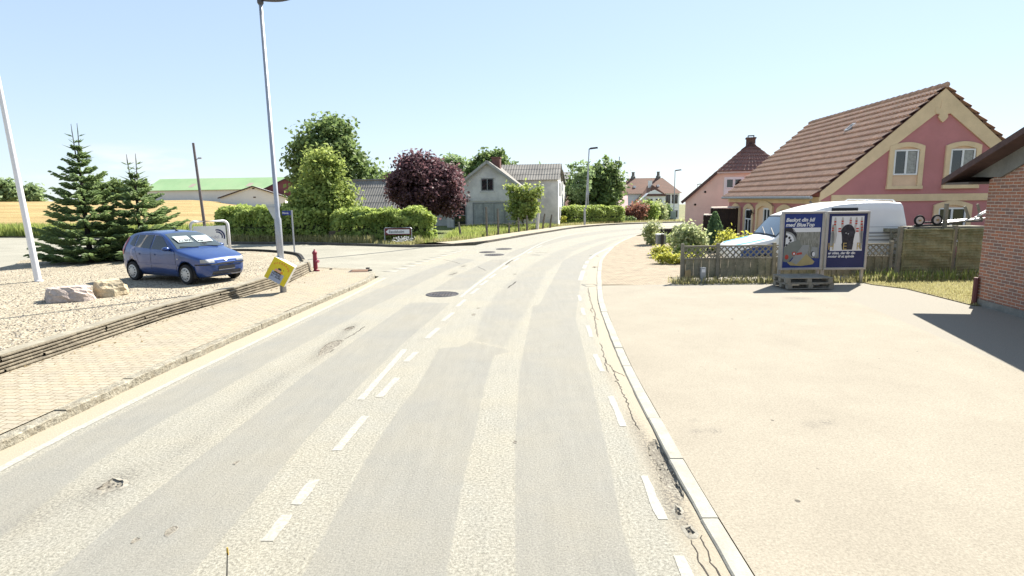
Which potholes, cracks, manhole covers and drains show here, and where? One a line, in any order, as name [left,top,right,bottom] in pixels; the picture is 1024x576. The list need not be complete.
pothole [89,477,129,495]
crack [691,535,721,576]
pothole [671,503,684,519]
pothole [681,525,699,539]
pothole [648,440,684,501]
crack [588,288,640,430]
pothole [318,340,343,357]
